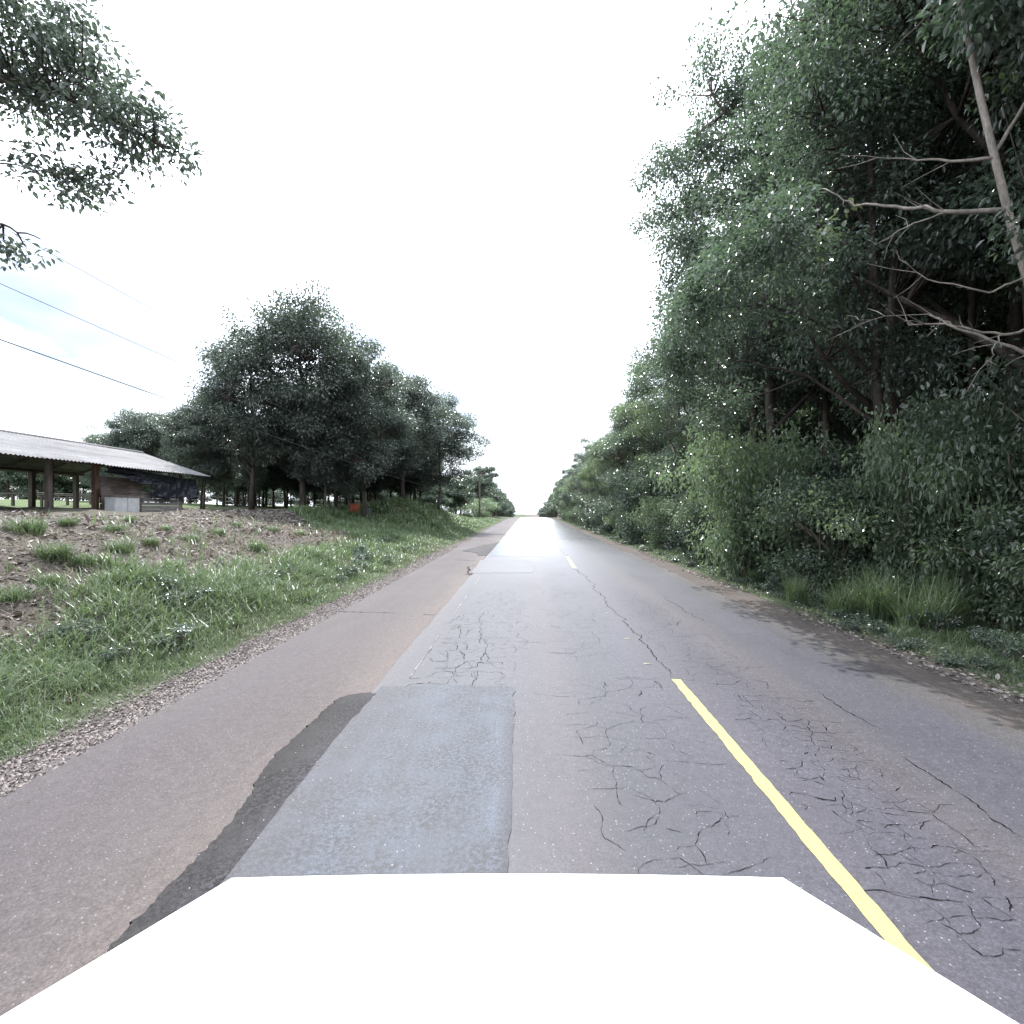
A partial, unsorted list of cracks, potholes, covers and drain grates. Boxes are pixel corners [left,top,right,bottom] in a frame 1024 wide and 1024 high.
crack [409,574,1022,957]
